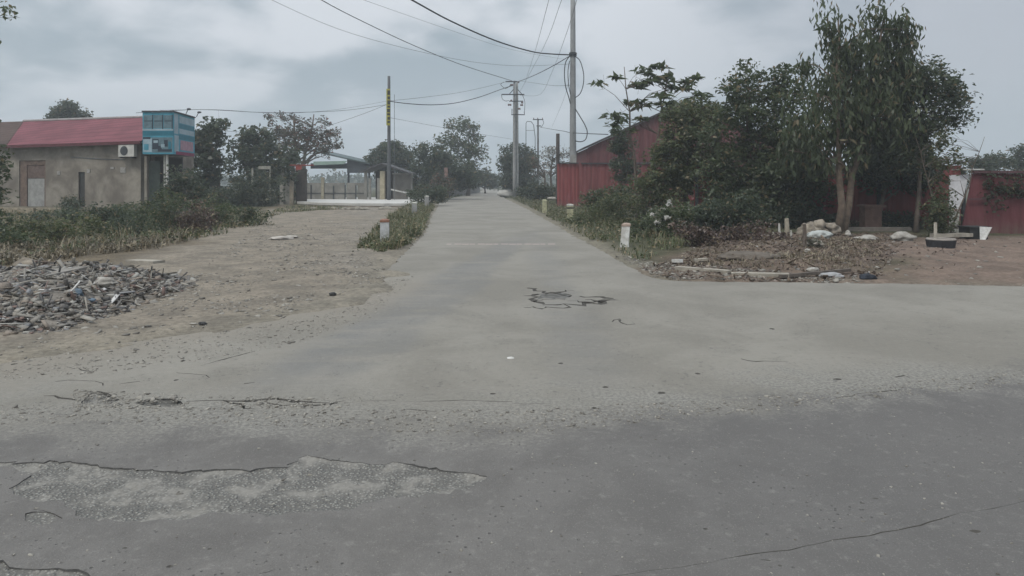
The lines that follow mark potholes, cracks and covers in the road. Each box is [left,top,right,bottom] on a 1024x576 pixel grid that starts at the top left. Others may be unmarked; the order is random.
pothole [0,455,487,522]
crack [524,288,631,325]
crack [615,501,1023,576]
